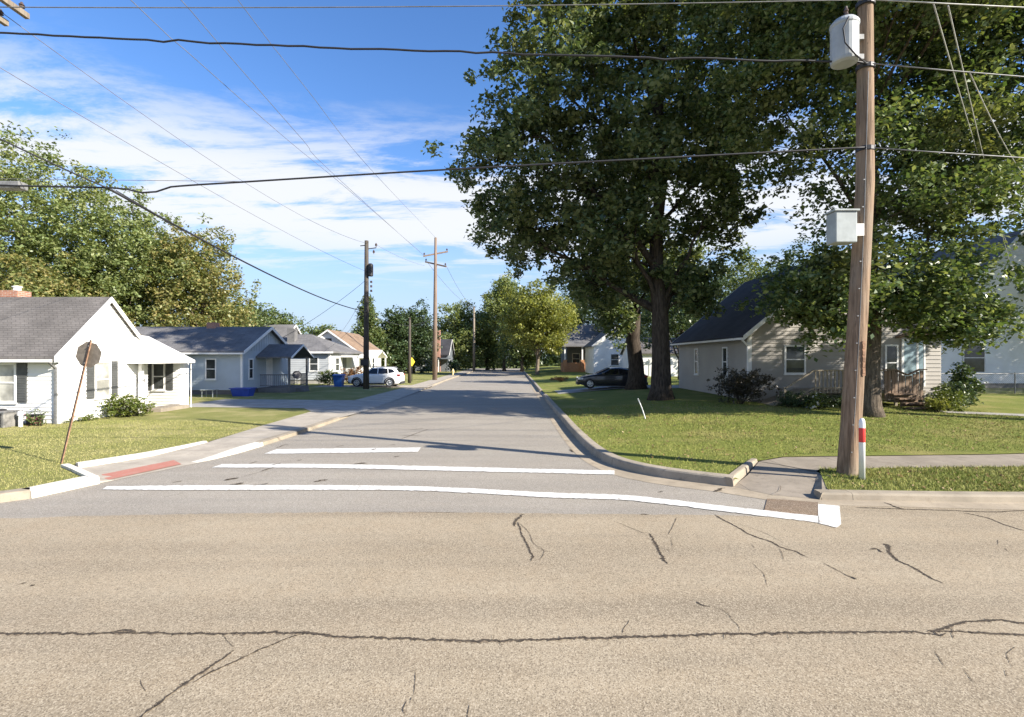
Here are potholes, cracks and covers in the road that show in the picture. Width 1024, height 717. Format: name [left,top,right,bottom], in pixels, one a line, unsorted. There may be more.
crack [714,514,858,584]
crack [0,602,1024,717]
crack [618,517,677,563]
crack [872,544,943,583]
crack [513,514,554,561]
